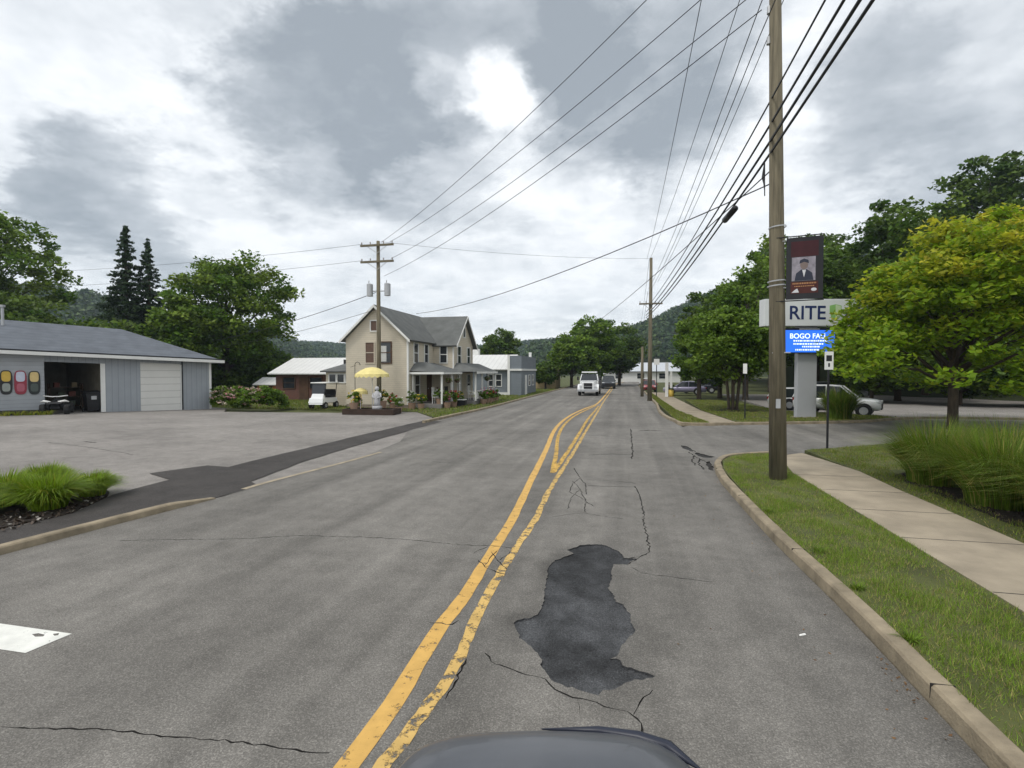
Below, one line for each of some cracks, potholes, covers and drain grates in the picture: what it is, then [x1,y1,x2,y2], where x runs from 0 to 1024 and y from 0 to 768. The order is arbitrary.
crack [123,535,511,574]
crack [485,653,653,732]
crack [597,429,658,459]
crack [0,726,330,753]
crack [554,468,708,582]
